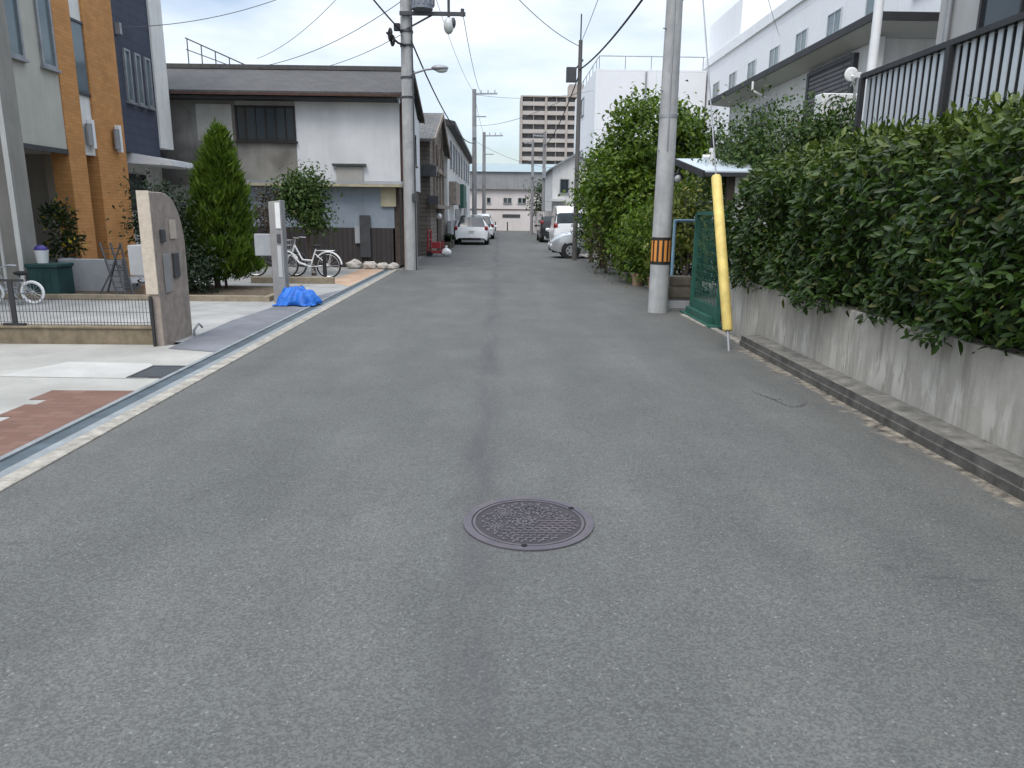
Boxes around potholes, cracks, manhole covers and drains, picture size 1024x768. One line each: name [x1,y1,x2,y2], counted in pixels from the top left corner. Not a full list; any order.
manhole cover [463,496,594,552]
drain grate [126,365,186,378]
